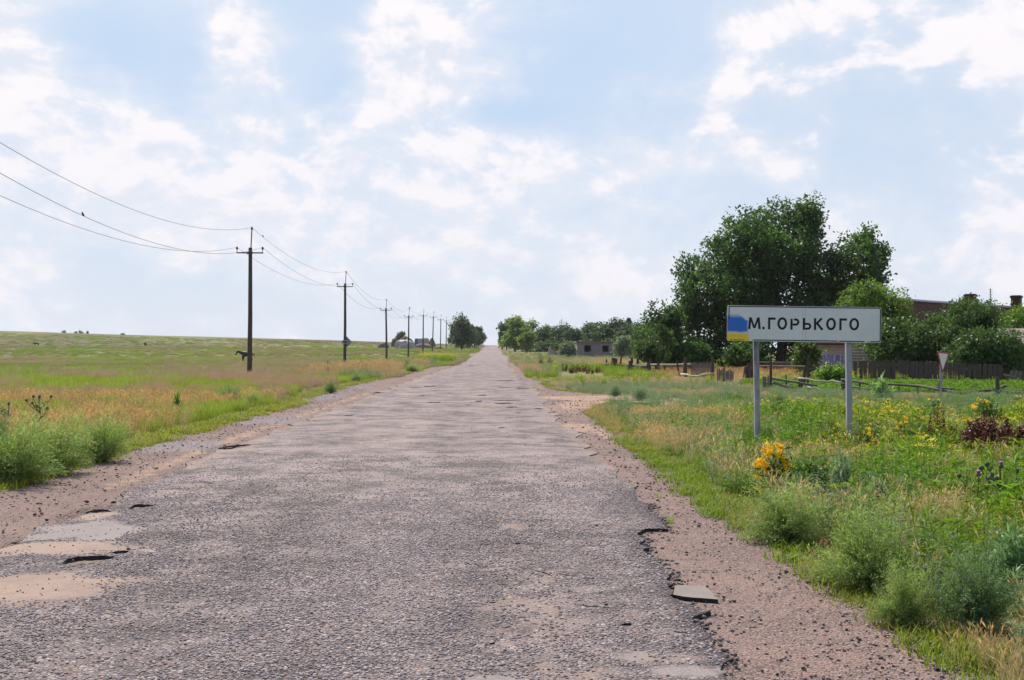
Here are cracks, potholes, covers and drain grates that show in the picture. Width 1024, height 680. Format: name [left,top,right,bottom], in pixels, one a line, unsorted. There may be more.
pothole [61,555,115,565]
